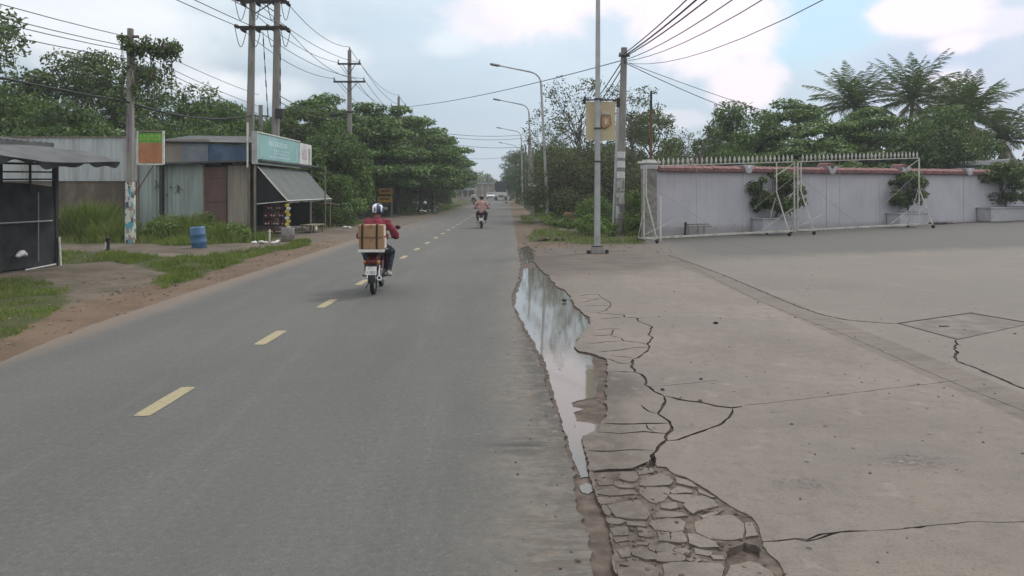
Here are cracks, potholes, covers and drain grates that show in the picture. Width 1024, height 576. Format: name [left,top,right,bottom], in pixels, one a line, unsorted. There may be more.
manhole cover [900,313,1024,340]
crack [581,294,1024,576]
